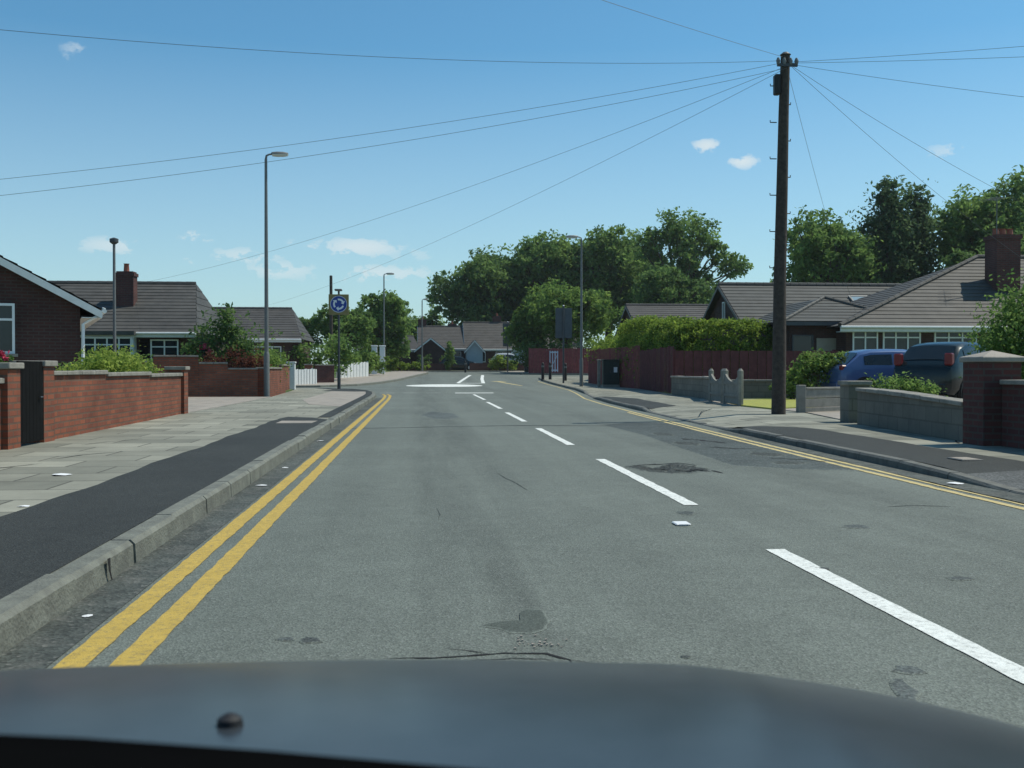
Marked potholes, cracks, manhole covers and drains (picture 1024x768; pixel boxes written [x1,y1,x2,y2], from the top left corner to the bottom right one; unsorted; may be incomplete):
pothole [624,463,713,474]
crack [406,648,583,662]
